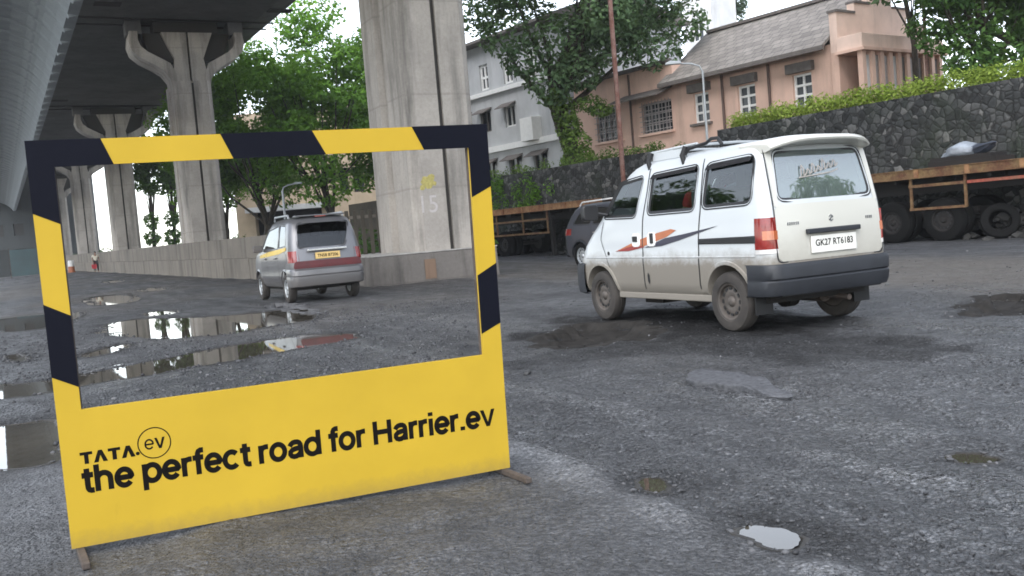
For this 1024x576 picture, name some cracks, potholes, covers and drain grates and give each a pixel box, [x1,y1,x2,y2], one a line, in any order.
pothole [523,319,673,350]
pothole [0,419,61,471]
pothole [81,292,140,305]
pothole [944,451,1019,466]
pothole [936,293,1024,317]
pothole [0,332,362,399]
pothole [94,309,320,339]
pothole [621,476,681,495]
pothole [725,521,810,554]
